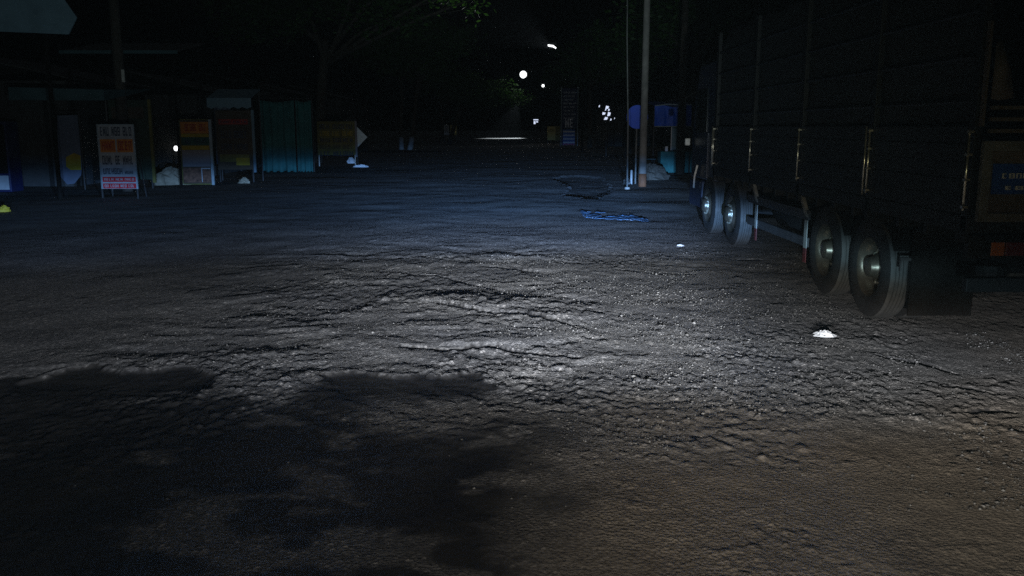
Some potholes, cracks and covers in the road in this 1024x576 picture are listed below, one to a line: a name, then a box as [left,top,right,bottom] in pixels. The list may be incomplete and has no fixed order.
crack [379,265,584,360]
pothole [547,175,618,200]
crack [873,354,1024,414]
